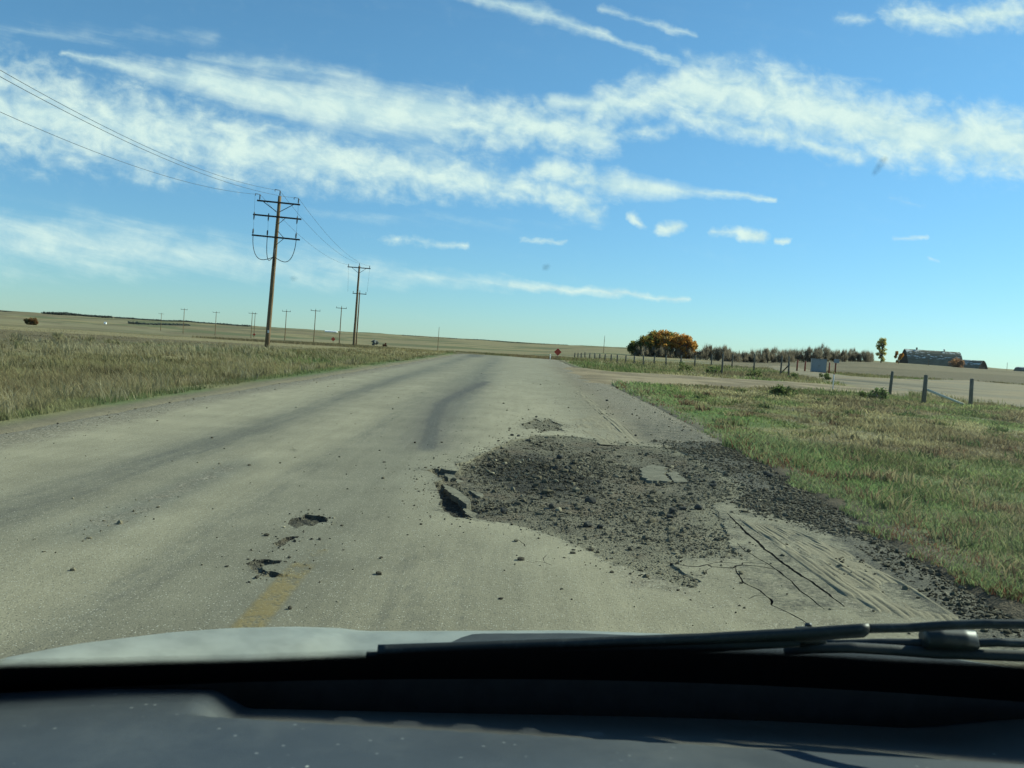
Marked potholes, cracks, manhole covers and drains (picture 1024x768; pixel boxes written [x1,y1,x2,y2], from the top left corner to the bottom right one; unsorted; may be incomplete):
pothole [524,419,564,432]
pothole [288,514,328,528]
crack [670,513,844,622]
pothole [246,559,284,578]
pothole [426,435,744,588]
